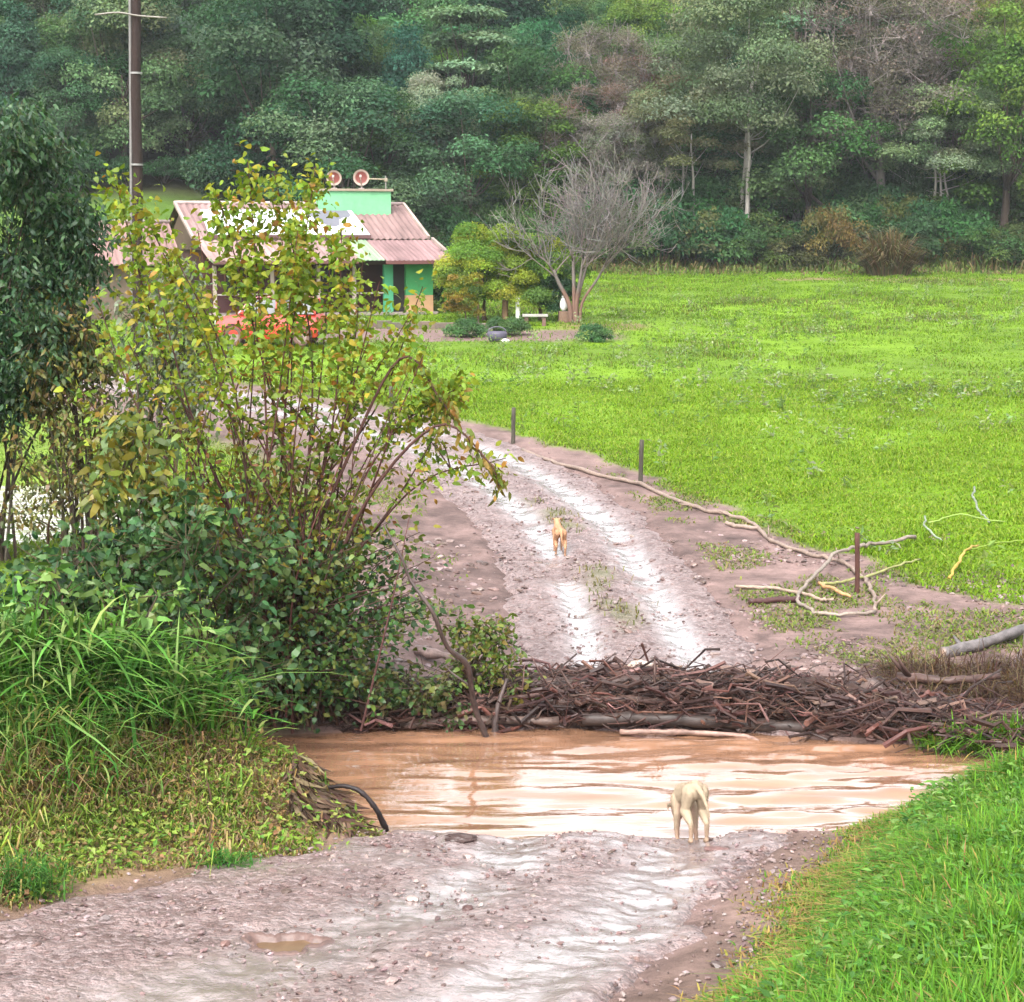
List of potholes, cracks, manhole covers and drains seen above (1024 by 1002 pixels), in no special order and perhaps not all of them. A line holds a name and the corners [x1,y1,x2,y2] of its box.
pothole [241,931,335,955]
